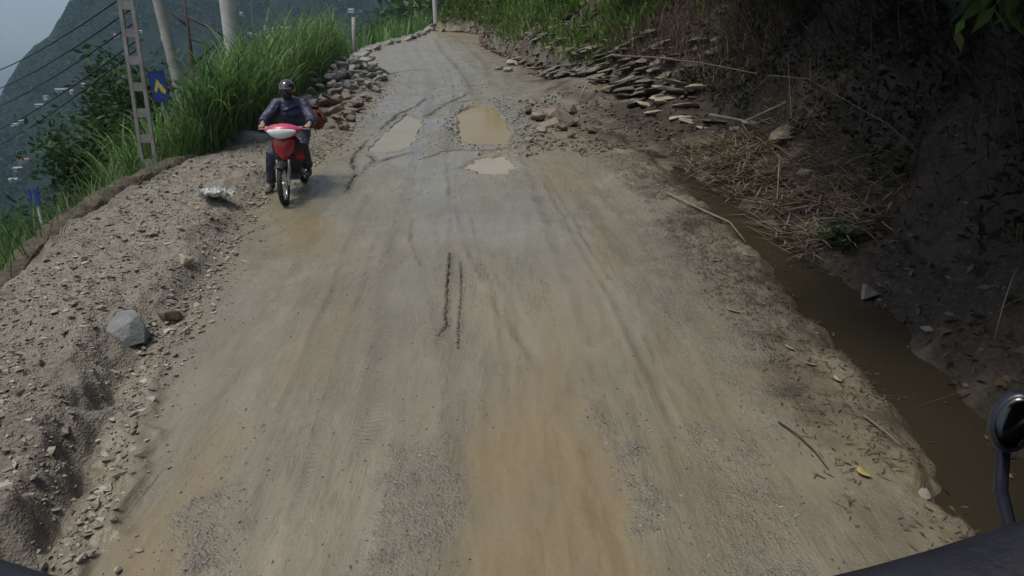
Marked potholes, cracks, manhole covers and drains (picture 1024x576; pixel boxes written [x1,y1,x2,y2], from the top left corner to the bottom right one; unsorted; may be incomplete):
crack [339,93,522,193]
pothole [363,112,426,154]
pothole [450,152,530,177]
crack [435,252,467,349]
pothole [448,104,517,147]
